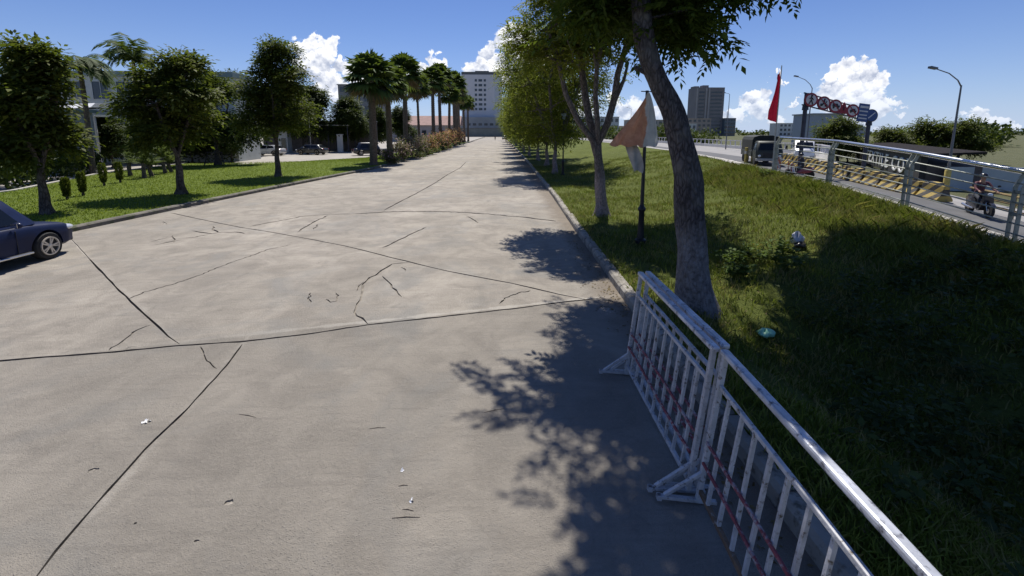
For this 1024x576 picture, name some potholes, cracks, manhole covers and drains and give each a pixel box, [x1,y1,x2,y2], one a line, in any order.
crack [128,211,553,324]
